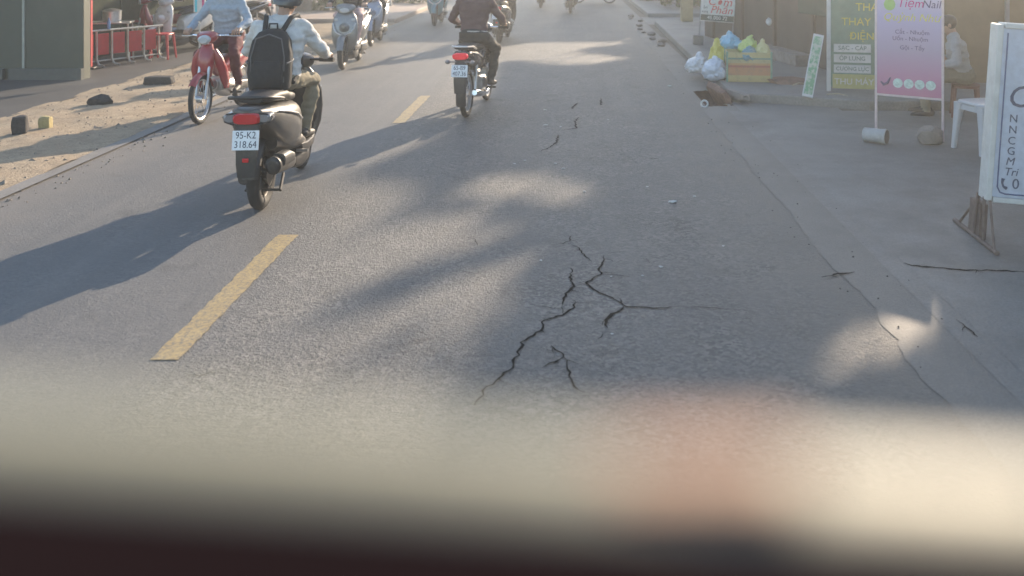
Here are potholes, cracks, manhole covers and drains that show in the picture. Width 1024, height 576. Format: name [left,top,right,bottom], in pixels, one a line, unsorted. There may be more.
crack [541,103,579,151]
crack [474,236,748,405]
pothole [693,90,733,107]
